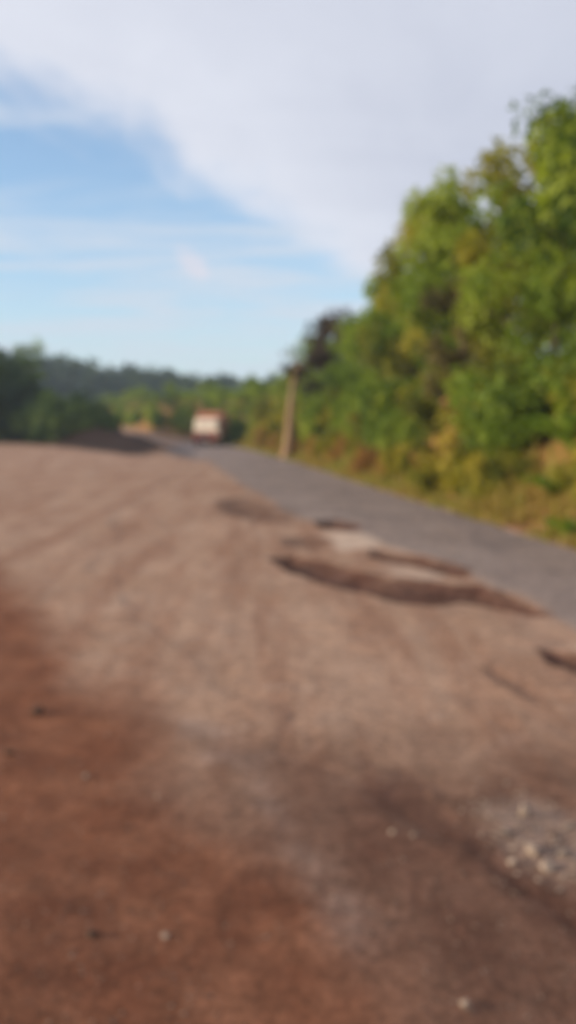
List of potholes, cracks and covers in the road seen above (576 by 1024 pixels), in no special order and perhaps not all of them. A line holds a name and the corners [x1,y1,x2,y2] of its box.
pothole [307,519,371,532]
pothole [363,548,479,581]
pothole [274,536,334,552]
pothole [527,645,576,679]
pothole [261,555,562,620]
pothole [208,496,305,525]
